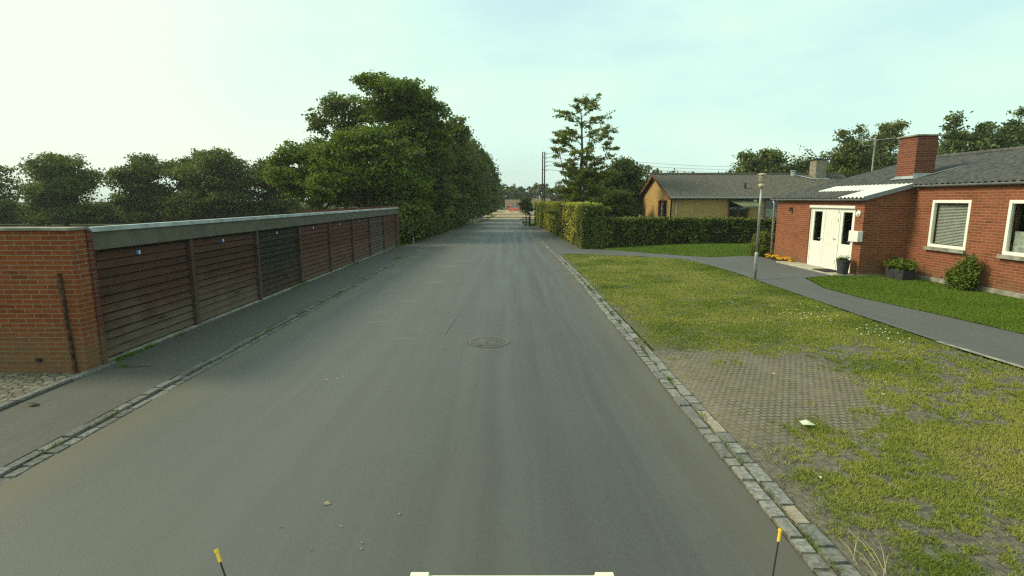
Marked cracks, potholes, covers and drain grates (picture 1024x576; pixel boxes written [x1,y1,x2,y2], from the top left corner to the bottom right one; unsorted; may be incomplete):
manhole cover [467,336,511,348]
